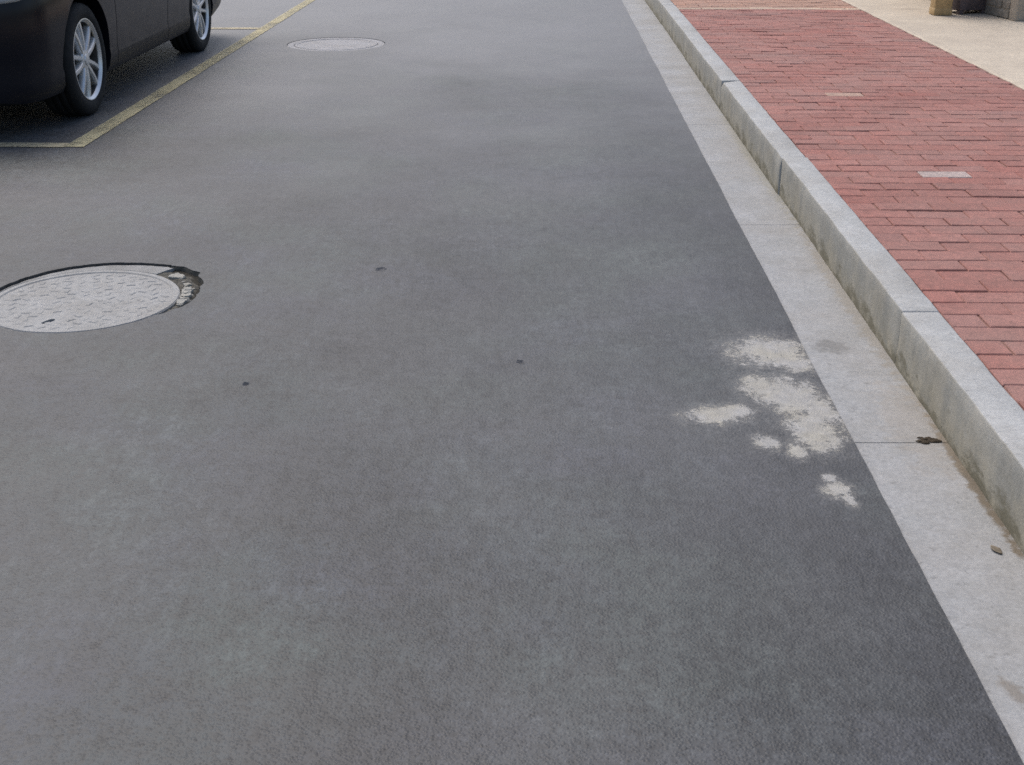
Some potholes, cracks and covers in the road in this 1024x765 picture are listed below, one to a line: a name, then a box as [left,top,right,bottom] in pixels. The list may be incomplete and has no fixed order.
pothole [158,266,203,313]
manhole cover [287,38,385,51]
manhole cover [0,265,202,333]
